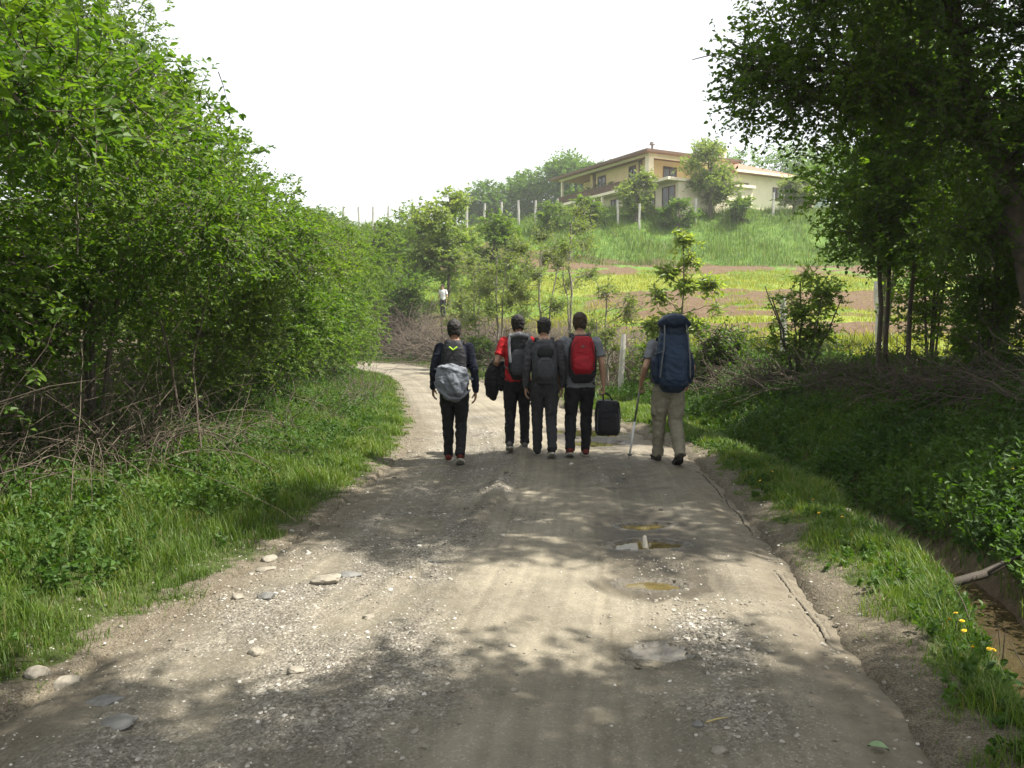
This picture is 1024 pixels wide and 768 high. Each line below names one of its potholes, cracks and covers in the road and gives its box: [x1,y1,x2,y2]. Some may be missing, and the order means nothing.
pothole [616,638,703,666]
pothole [609,577,696,593]
pothole [606,538,695,552]
pothole [610,520,680,532]
crack [693,470,756,536]
crack [772,573,836,649]
